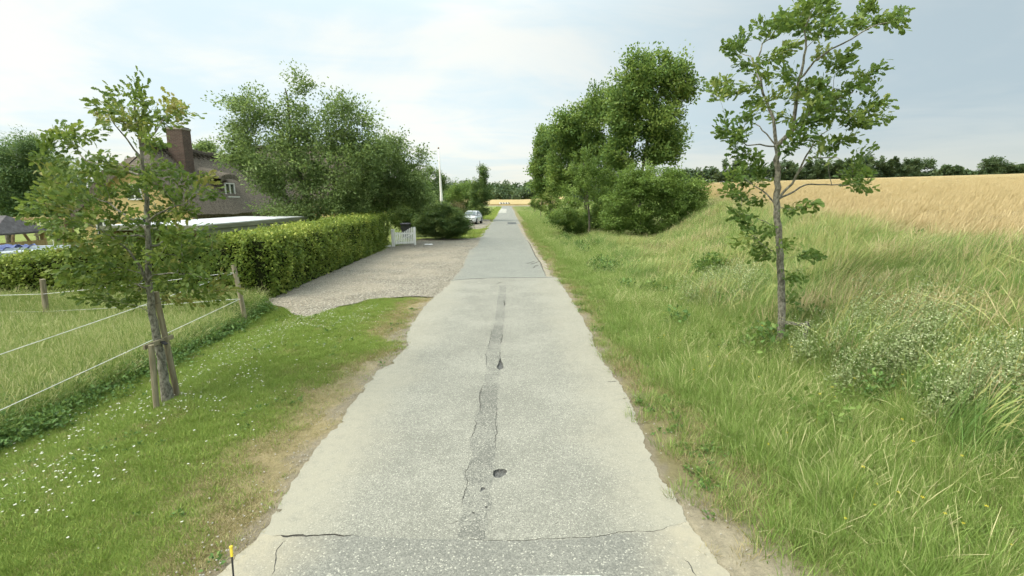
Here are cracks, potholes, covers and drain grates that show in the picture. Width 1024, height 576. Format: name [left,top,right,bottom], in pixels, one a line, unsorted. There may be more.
crack [471,388,498,449]
crack [473,522,671,541]
crack [272,534,358,574]
